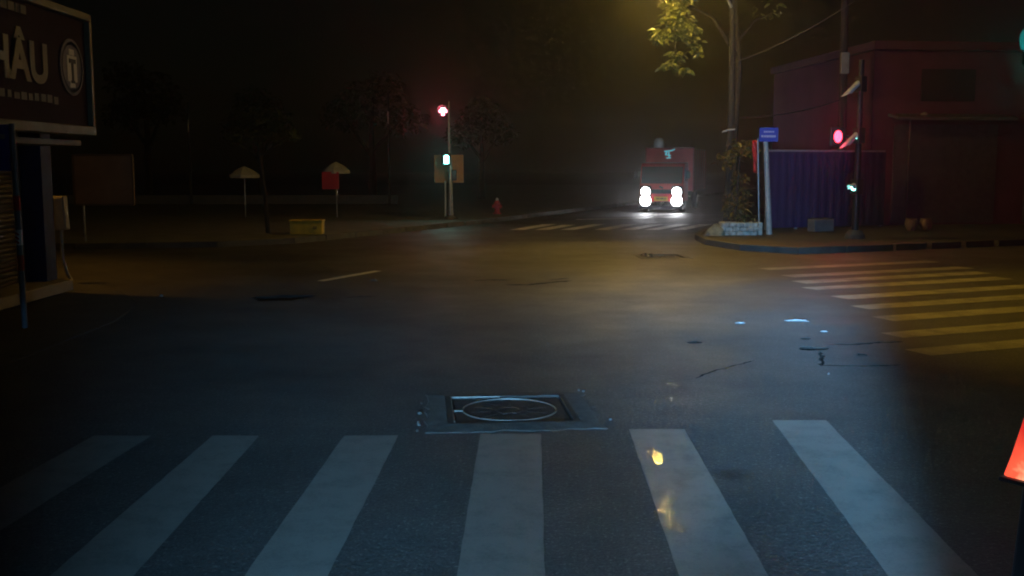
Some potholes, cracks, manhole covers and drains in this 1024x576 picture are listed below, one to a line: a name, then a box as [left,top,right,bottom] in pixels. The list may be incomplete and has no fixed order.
crack [818,342,893,367]
manhole cover [416,389,612,433]
crack [697,360,754,378]
